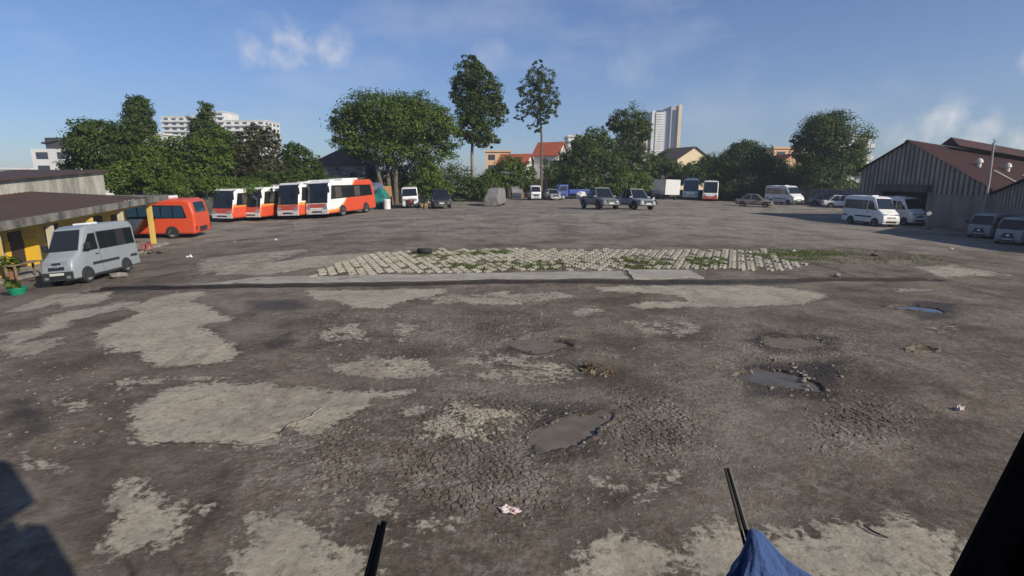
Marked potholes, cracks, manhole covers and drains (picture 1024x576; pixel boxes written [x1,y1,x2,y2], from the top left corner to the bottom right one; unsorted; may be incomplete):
pothole [496,336,582,356]
pothole [724,356,844,396]
crack [154,393,557,522]
pothole [901,343,942,353]
pothole [752,333,838,352]
pothole [880,304,953,314]
pothole [521,409,622,460]
